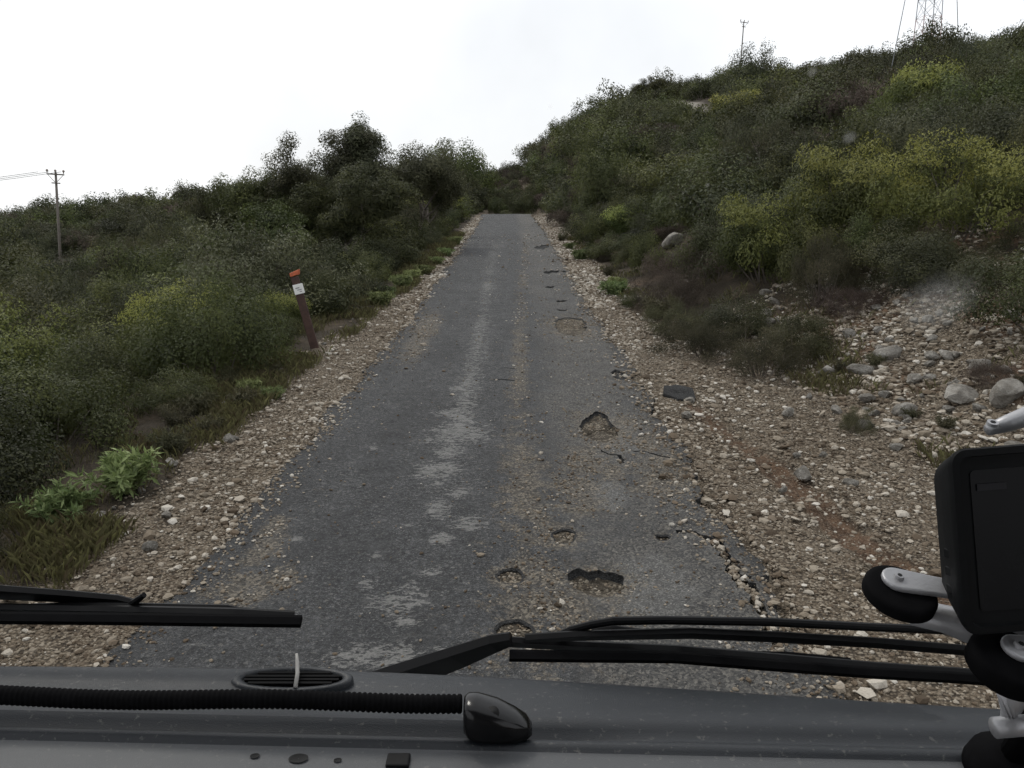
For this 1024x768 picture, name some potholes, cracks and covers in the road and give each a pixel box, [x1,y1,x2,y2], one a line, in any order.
pothole [579,411,618,443]
crack [601,450,672,463]
crack [676,530,785,651]
pothole [495,568,525,584]
pothole [567,568,625,597]
pothole [554,317,587,335]
pothole [551,528,577,544]
pothole [494,619,536,637]
